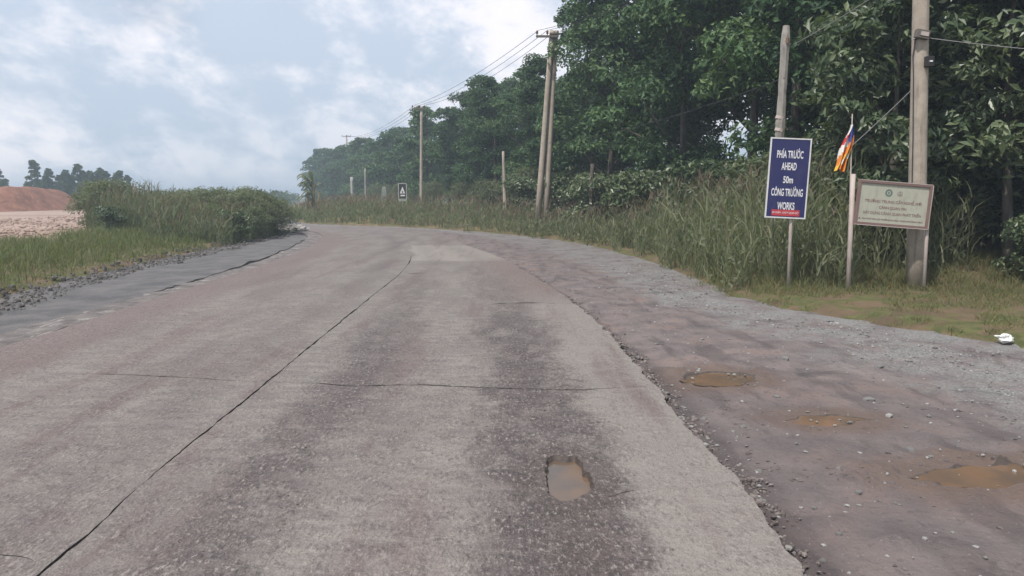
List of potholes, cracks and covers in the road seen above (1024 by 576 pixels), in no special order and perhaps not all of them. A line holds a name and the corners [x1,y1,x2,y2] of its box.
crack [70,372,249,382]
pothole [784,414,871,427]
pothole [679,371,757,387]
pothole [544,455,595,501]
crack [289,382,642,390]
pothole [907,456,1024,489]
